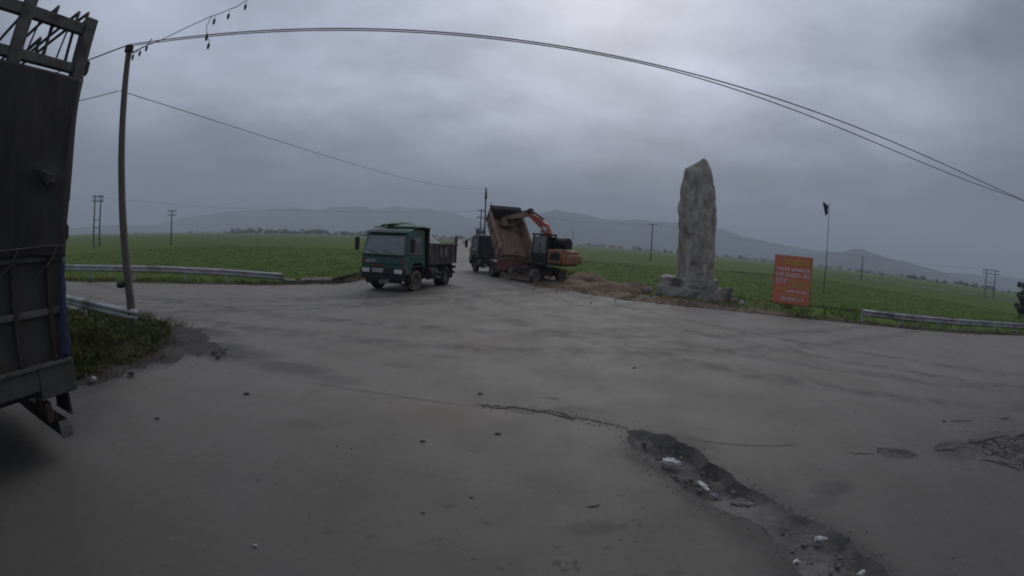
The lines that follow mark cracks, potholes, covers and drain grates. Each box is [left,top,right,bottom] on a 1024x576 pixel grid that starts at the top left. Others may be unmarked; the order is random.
crack [298,378,627,429]
pothole [932,442,955,451]
crack [936,418,1024,470]
pothole [876,447,919,459]
pothole [627,430,888,576]
